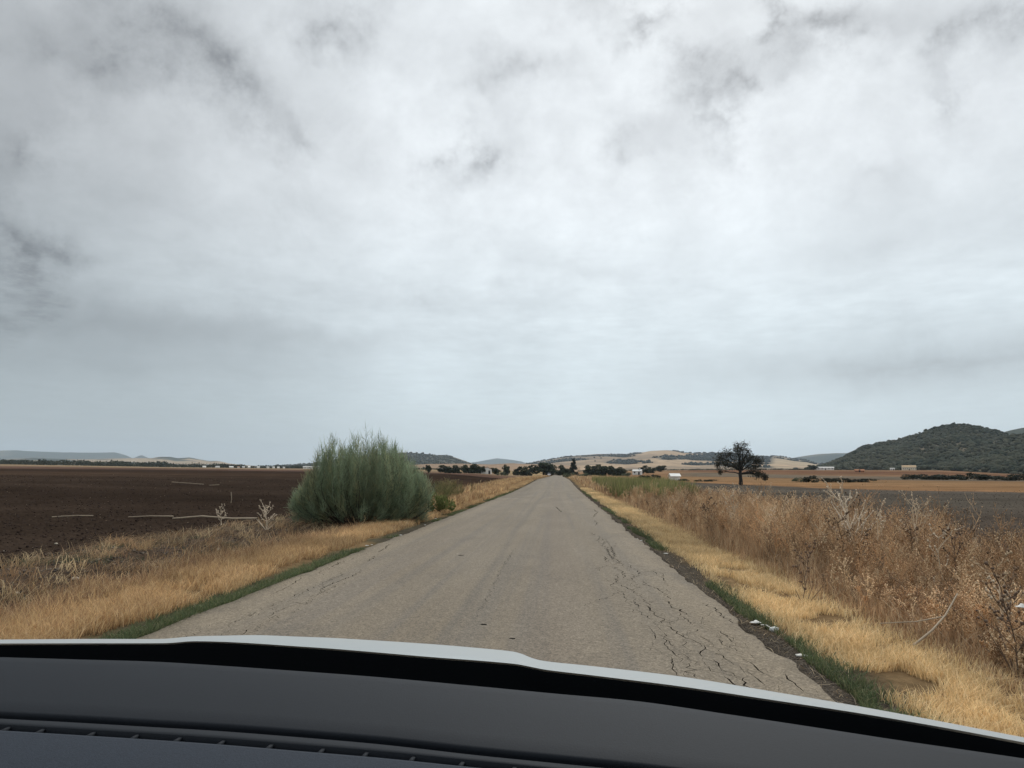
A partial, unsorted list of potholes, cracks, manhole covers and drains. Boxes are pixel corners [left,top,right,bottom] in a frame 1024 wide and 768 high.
crack [186,543,391,637]
crack [582,511,832,701]
